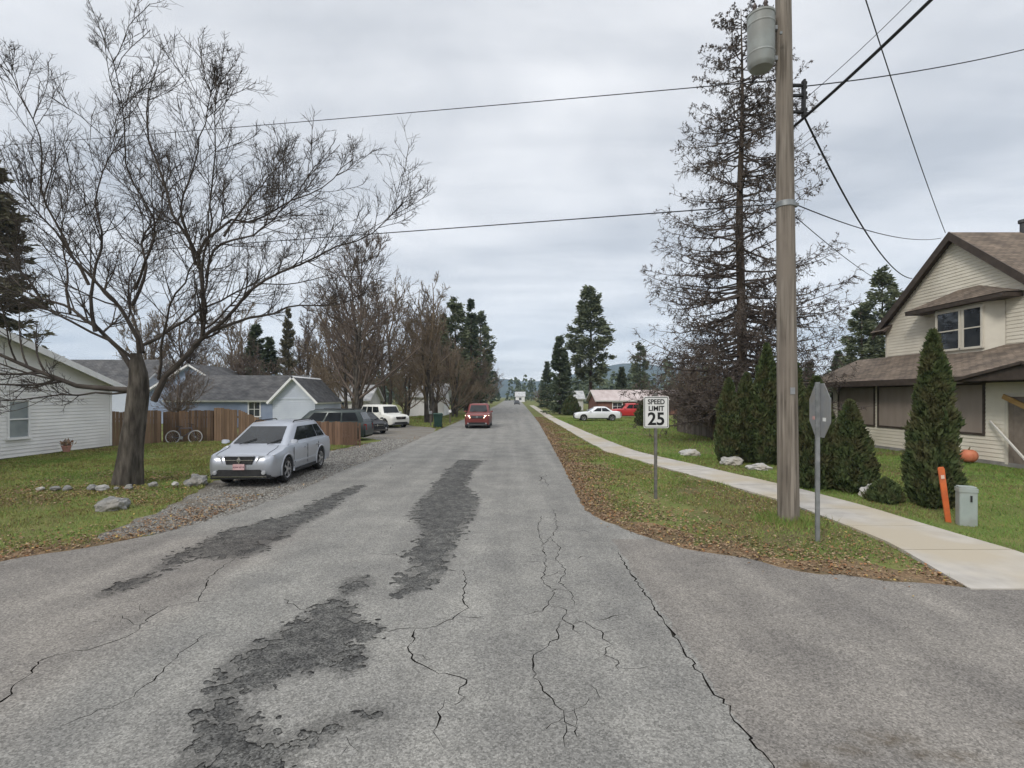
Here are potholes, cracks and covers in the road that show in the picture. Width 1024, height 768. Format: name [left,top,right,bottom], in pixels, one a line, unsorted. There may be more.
crack [0,560,233,703]
crack [54,633,210,730]
crack [382,571,482,745]
crack [521,510,775,768]
